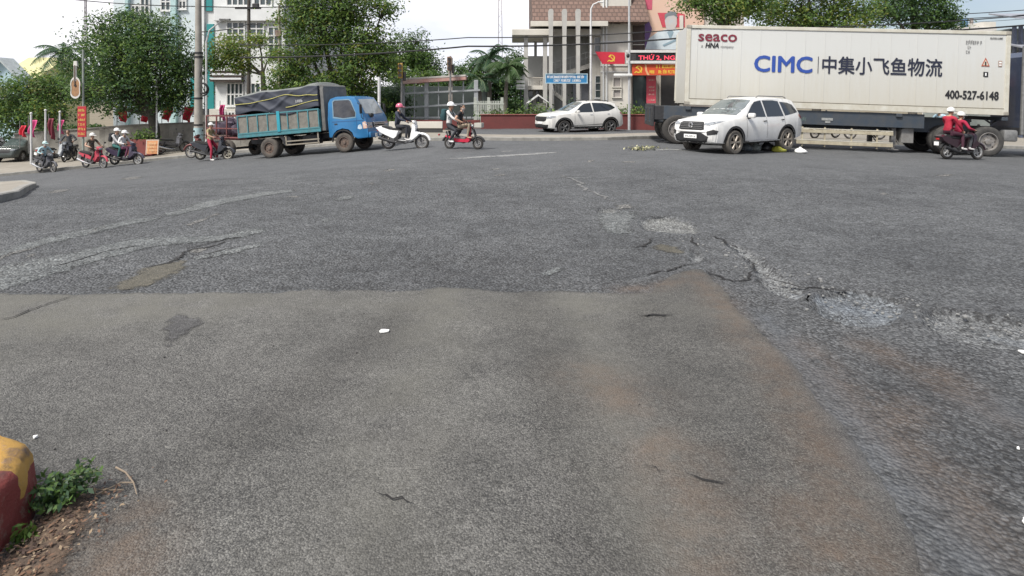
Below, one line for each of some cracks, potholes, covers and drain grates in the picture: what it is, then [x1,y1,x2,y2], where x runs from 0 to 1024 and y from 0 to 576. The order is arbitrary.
crack [375,491,414,504]
pothole [801,286,916,331]
crack [138,237,238,269]
crack [706,236,853,292]
